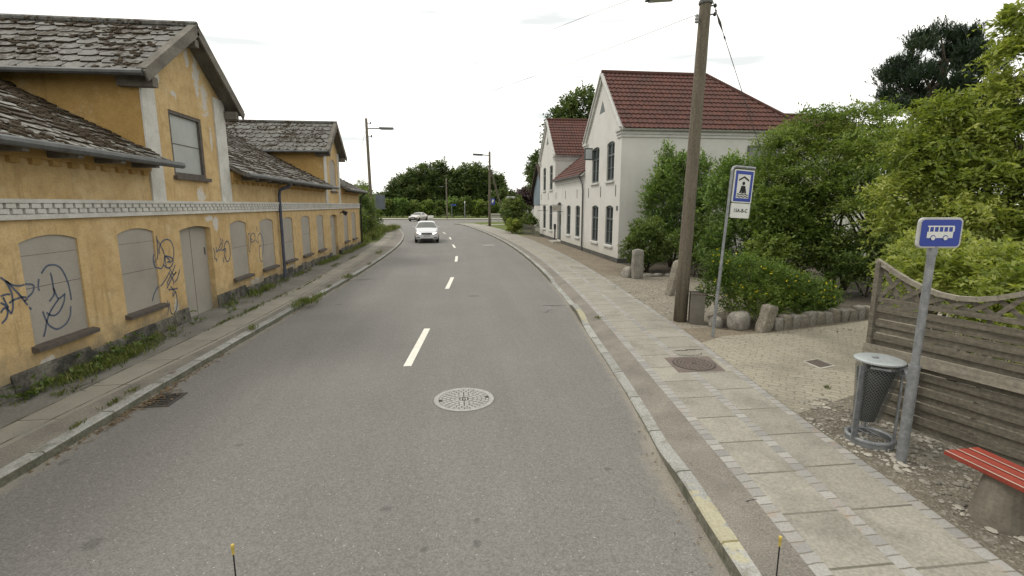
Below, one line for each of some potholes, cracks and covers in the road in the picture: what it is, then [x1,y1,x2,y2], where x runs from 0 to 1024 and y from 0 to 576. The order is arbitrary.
drain grate [802,359,836,369]
drain grate [138,392,188,408]
manhole cover [434,388,494,412]
manhole cover [665,356,725,373]
